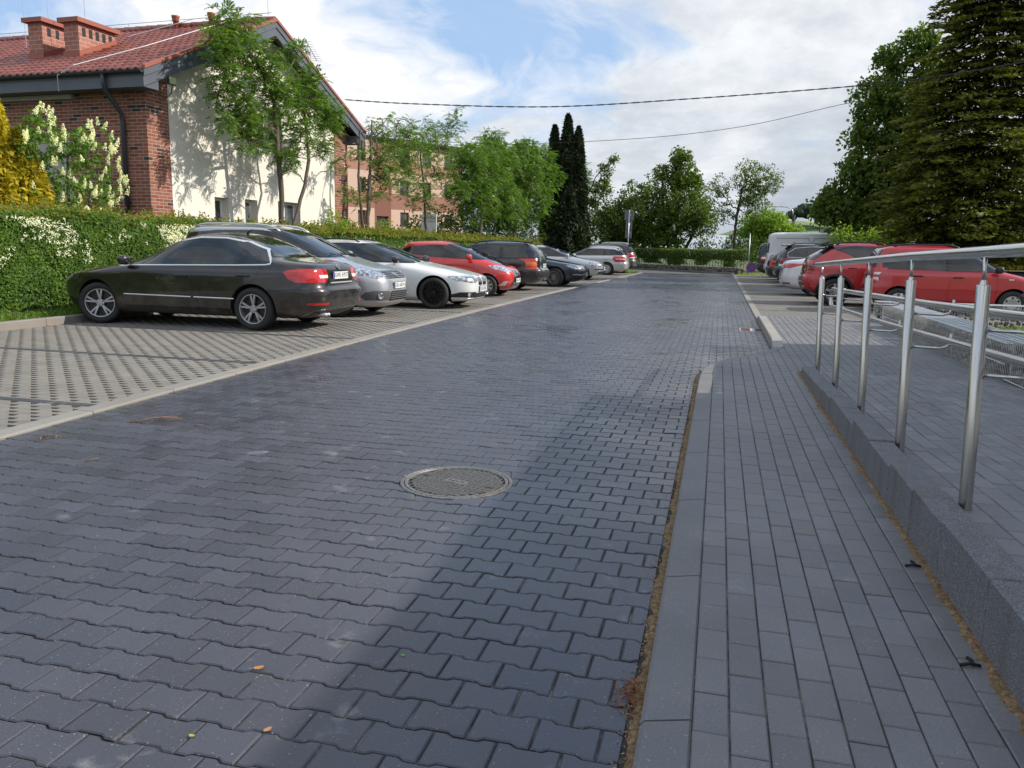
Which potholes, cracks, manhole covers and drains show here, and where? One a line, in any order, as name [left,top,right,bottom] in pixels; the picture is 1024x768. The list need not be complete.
manhole cover [400,466,513,500]
